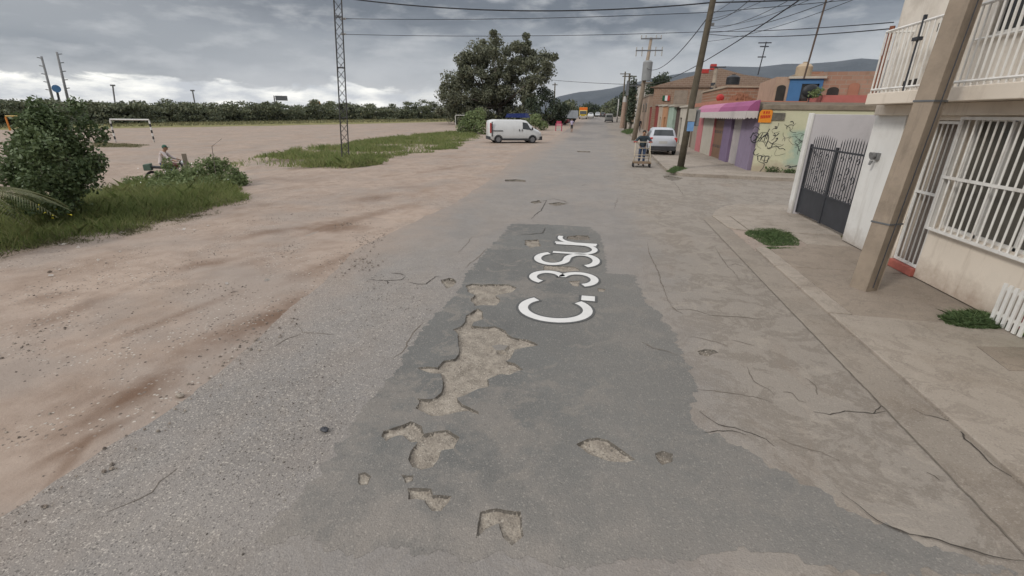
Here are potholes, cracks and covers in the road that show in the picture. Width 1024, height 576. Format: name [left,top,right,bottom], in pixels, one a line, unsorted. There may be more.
pothole [381,421,459,470]
pothole [466,284,516,306]
crack [647,244,769,320]
pothole [577,438,635,462]
pothole [407,488,451,511]
pothole [358,472,371,485]
pothole [655,451,673,465]
crack [912,408,1012,477]
pothole [416,309,538,416]
crack [841,492,1024,561]
crack [697,367,818,402]
pothole [476,508,524,545]
